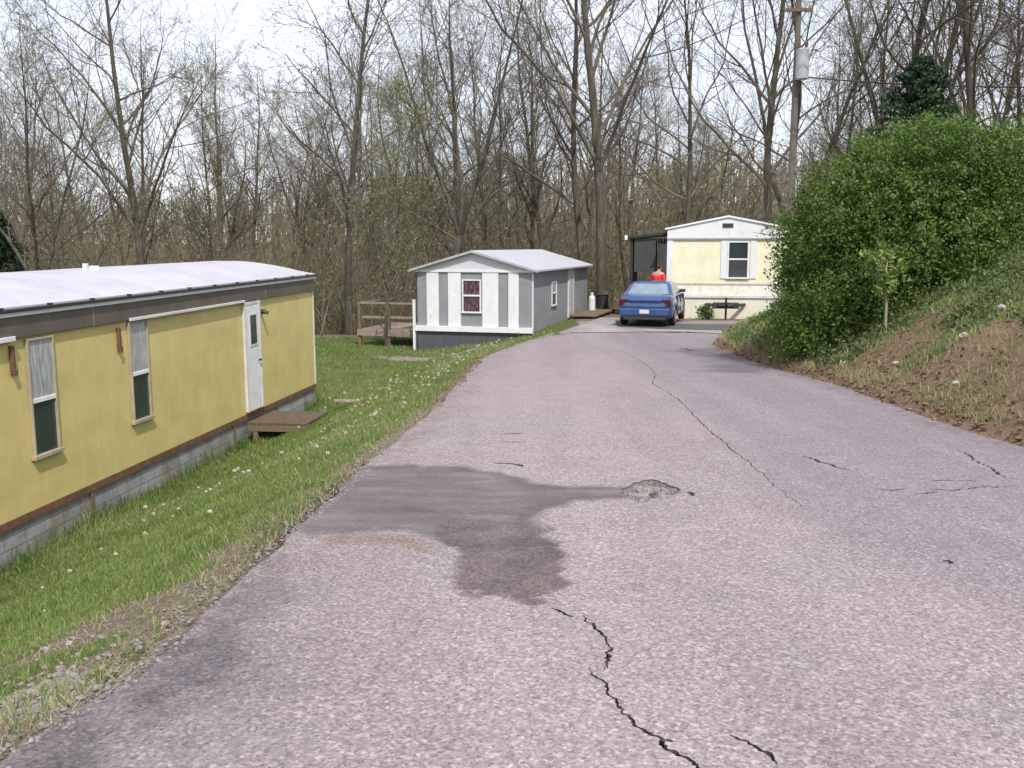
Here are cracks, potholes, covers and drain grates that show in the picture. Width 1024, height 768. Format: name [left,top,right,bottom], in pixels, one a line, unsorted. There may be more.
crack [730,735,777,764]
pothole [621,479,681,502]
crack [880,450,1011,494]
crack [552,608,700,768]
